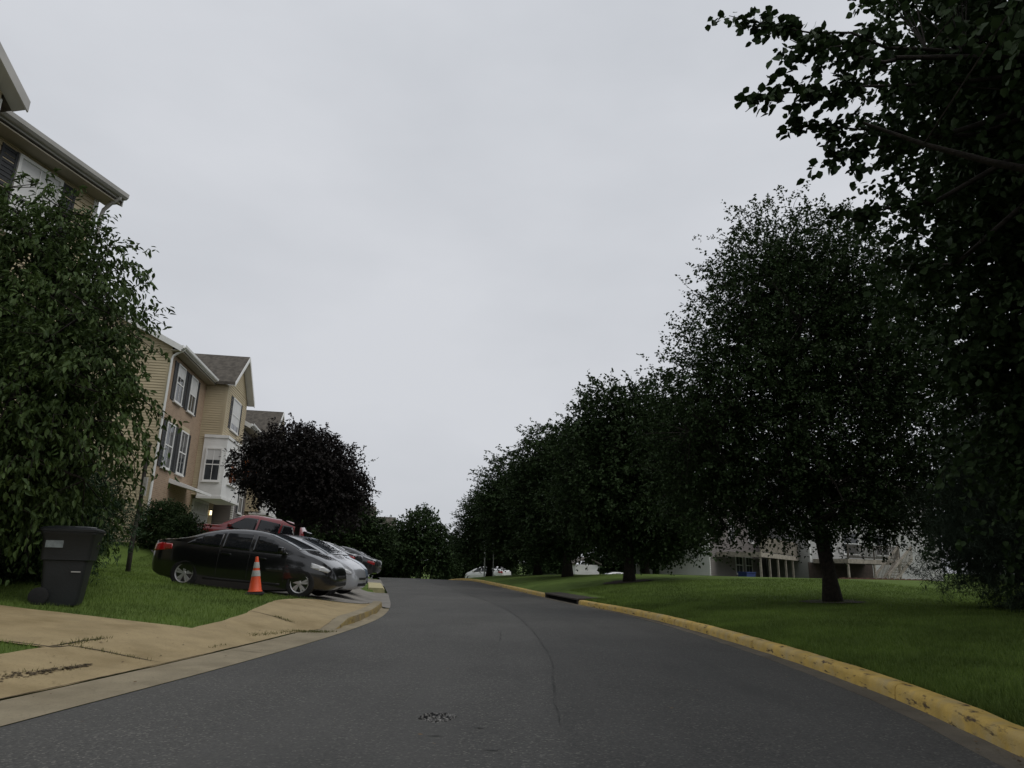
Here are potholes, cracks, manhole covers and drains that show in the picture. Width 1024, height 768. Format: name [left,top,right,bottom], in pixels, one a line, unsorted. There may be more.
pothole [418,712,456,723]
drain grate [545,592,597,604]
crack [470,595,561,725]
